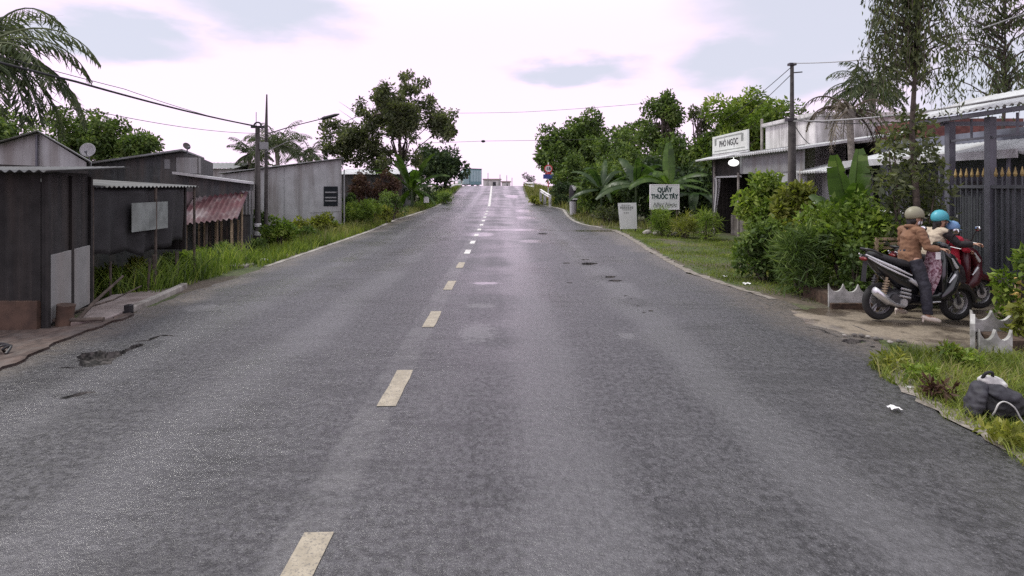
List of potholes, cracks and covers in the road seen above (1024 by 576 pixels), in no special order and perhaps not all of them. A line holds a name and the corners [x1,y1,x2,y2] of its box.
pothole [77,344,144,367]
